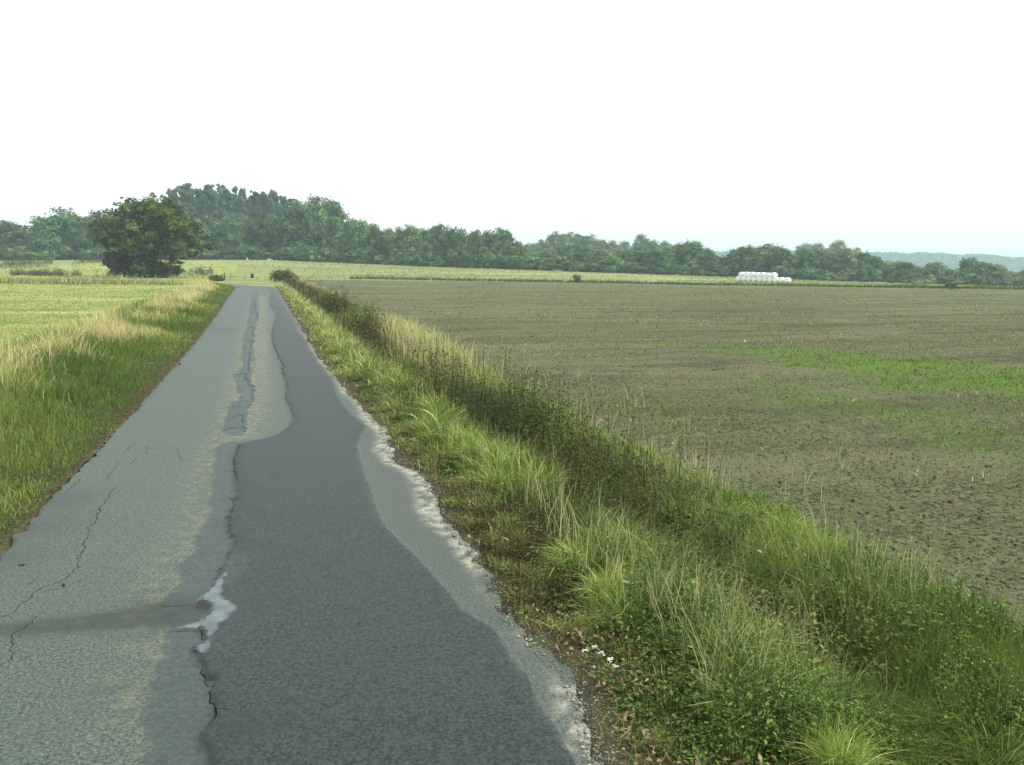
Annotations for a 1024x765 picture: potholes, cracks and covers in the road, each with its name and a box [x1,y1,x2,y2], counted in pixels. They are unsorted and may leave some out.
crack [0,431,183,666]
